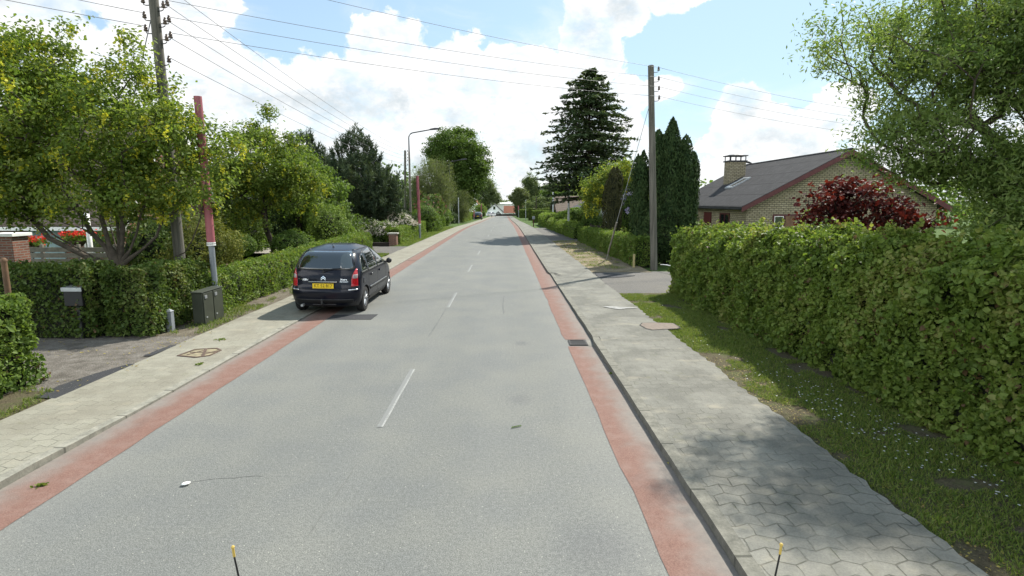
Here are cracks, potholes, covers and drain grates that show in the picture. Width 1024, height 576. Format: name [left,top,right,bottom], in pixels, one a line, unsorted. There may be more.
manhole cover [177,348,222,358]
manhole cover [640,322,681,330]
